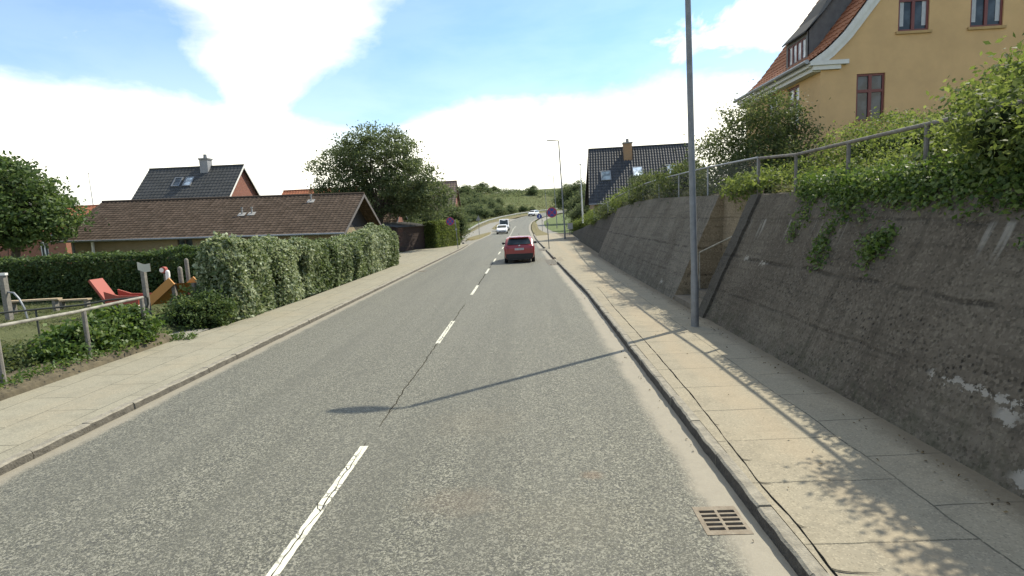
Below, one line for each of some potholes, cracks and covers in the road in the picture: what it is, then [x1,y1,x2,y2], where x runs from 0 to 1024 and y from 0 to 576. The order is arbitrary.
crack [380,305,465,425]
drain grate [692,506,754,536]
